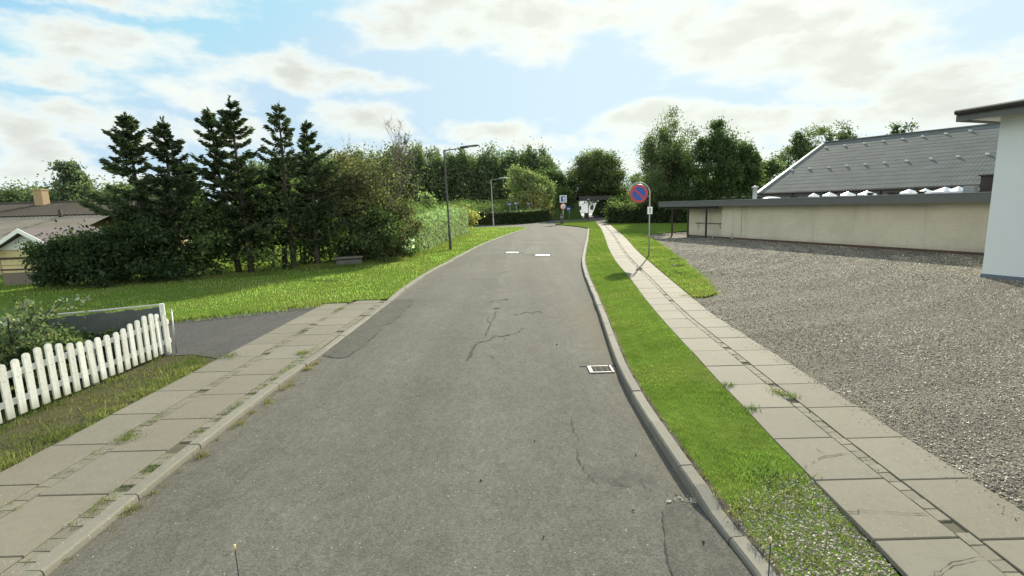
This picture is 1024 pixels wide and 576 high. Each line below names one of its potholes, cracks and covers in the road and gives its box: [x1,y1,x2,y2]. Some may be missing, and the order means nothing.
crack [571,418,650,491]
drain grate [579,365,616,373]
crack [467,299,541,360]
